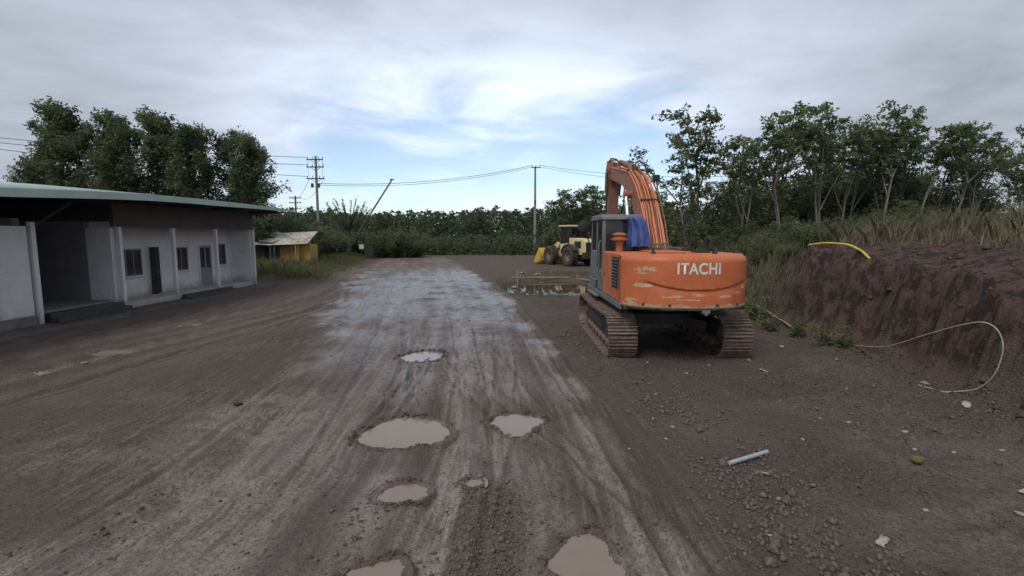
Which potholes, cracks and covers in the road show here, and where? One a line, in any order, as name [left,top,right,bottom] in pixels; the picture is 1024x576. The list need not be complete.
pothole [396,349,448,365]
pothole [340,552,417,576]
pothole [348,414,458,452]
pothole [459,477,488,488]
pothole [484,411,549,443]
pothole [370,479,437,506]
pothole [538,524,639,576]
